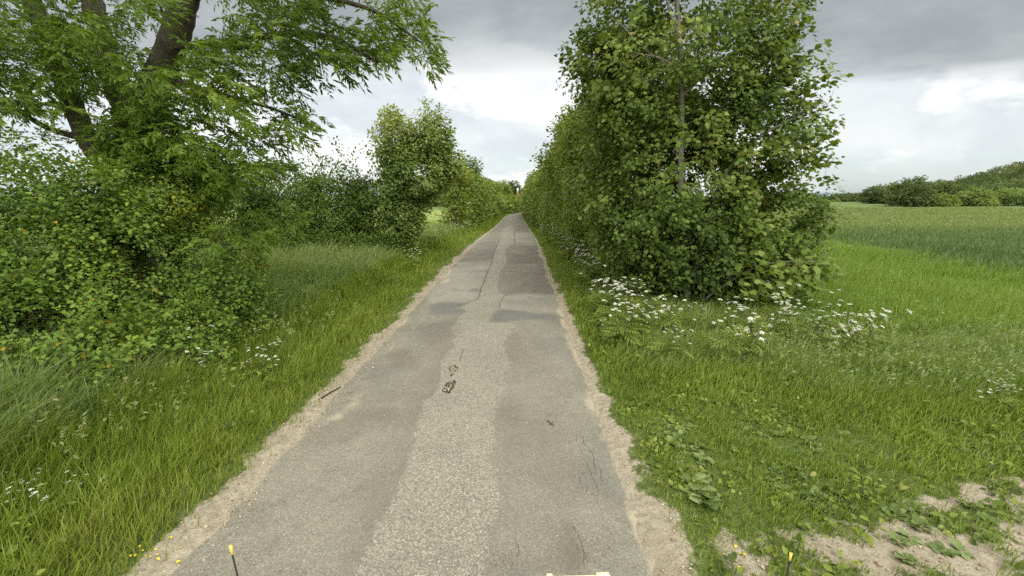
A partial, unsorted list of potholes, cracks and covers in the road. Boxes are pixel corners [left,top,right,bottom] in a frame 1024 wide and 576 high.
crack [568,436,601,496]
pothole [442,379,457,394]
